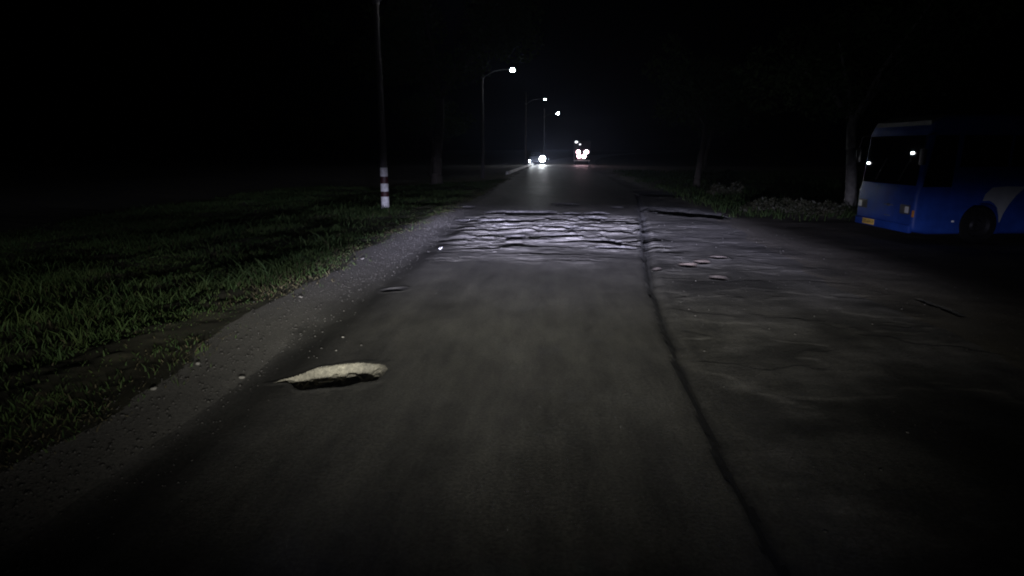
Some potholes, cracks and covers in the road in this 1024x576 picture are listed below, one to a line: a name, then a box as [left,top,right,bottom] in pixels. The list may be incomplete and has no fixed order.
crack [915,299,966,317]
